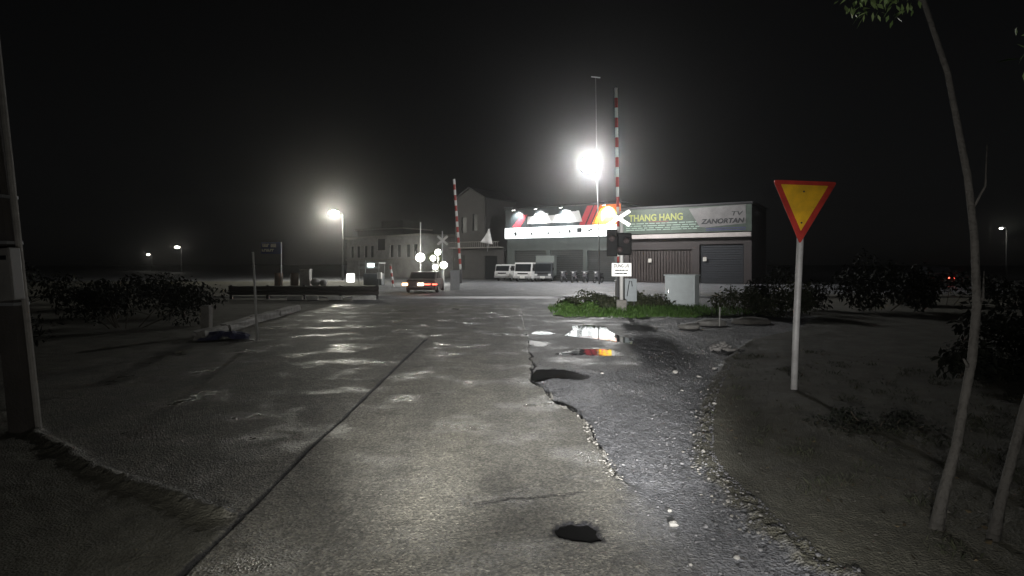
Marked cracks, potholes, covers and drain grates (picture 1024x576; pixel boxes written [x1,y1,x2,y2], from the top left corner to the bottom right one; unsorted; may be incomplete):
crack [527,352,600,446]
crack [476,490,581,504]
pothole [531,368,592,382]
pothole [547,518,609,545]
